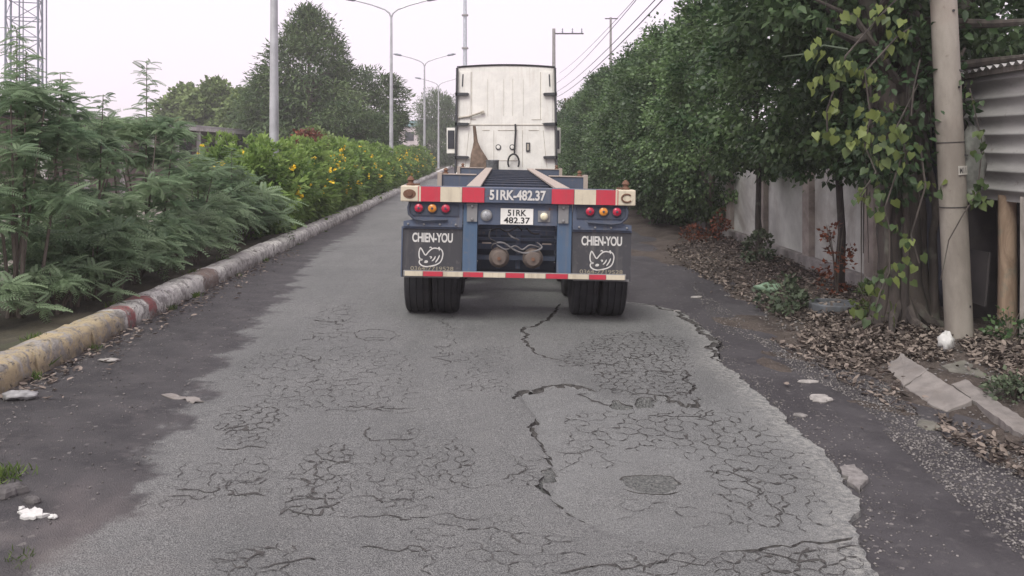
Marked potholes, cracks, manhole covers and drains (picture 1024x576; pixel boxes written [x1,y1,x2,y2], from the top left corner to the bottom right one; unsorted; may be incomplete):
crack [137,303,869,576]
